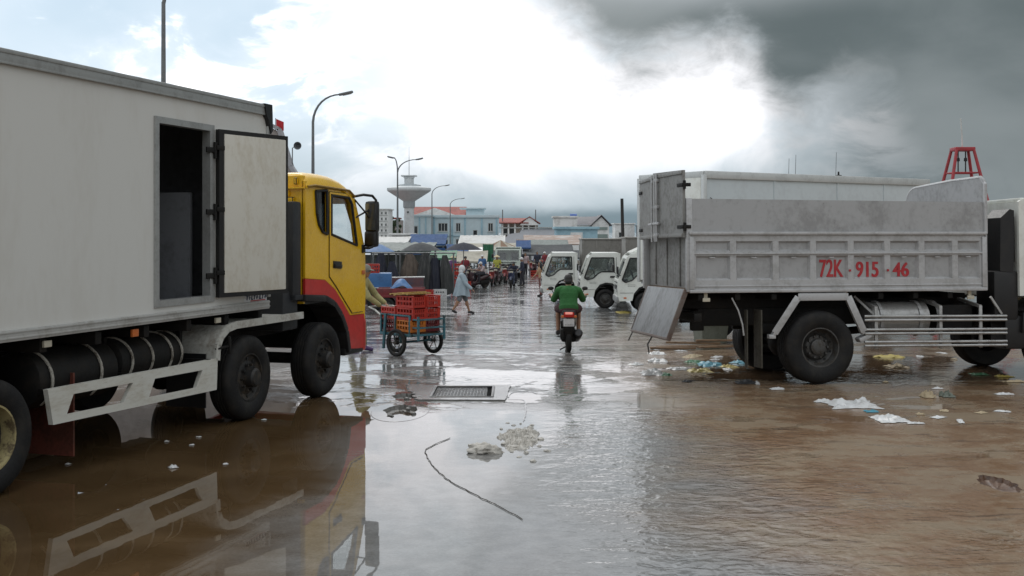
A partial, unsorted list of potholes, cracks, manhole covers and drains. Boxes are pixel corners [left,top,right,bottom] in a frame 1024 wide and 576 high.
crack [424,438,523,520]
pothole [956,470,1024,499]
